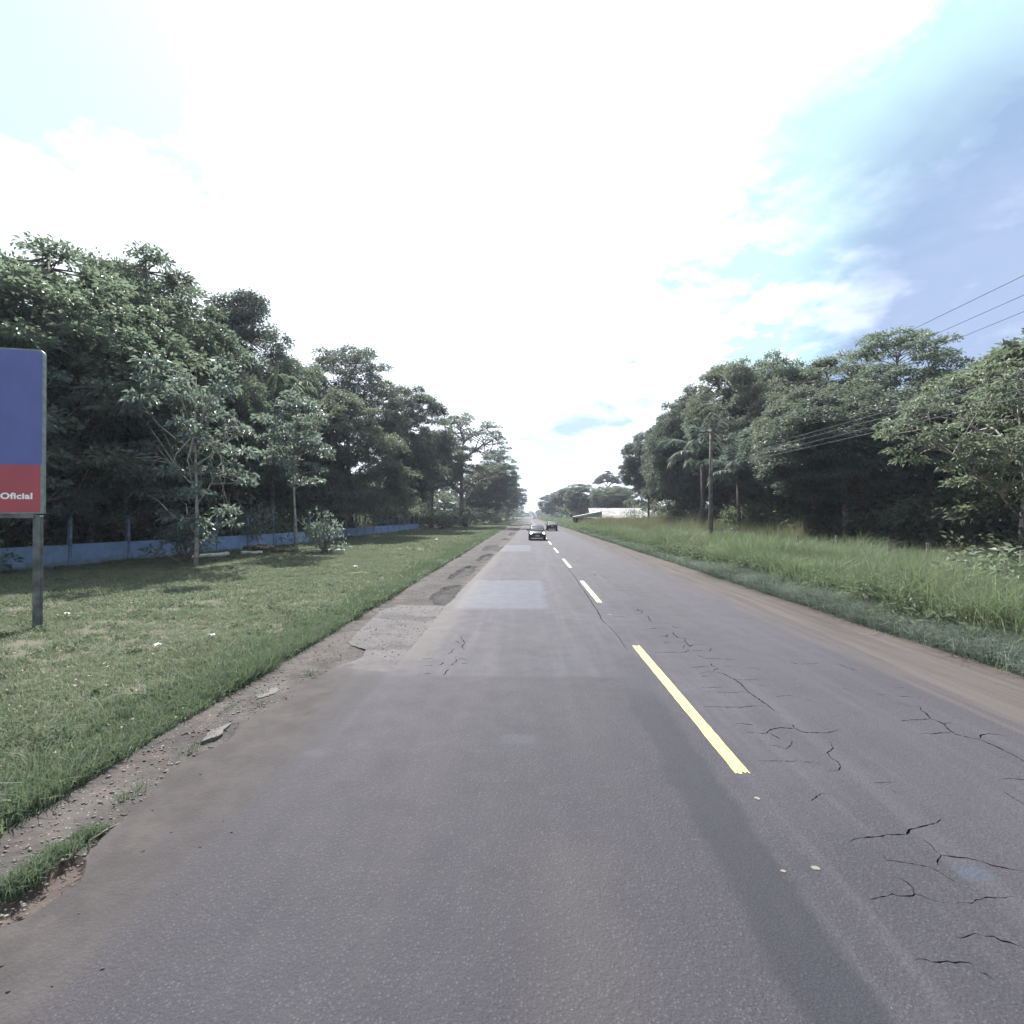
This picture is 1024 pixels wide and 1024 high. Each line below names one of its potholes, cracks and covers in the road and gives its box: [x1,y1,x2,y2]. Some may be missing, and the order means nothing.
pothole [446,565,478,580]
crack [958,933,1021,947]
pothole [428,585,463,606]
crack [916,959,995,981]
crack [851,819,1022,903]
crack [614,609,841,771]
crack [882,687,1023,761]
